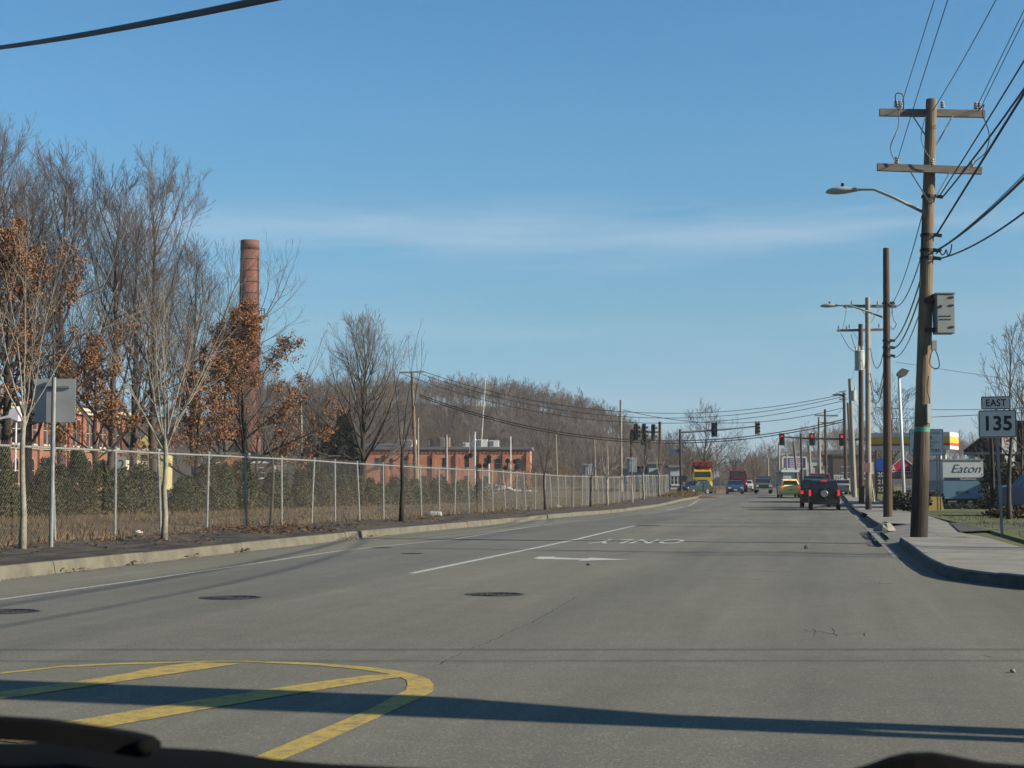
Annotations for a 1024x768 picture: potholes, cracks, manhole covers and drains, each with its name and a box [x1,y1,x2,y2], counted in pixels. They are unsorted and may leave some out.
crack [432,597,576,667]
